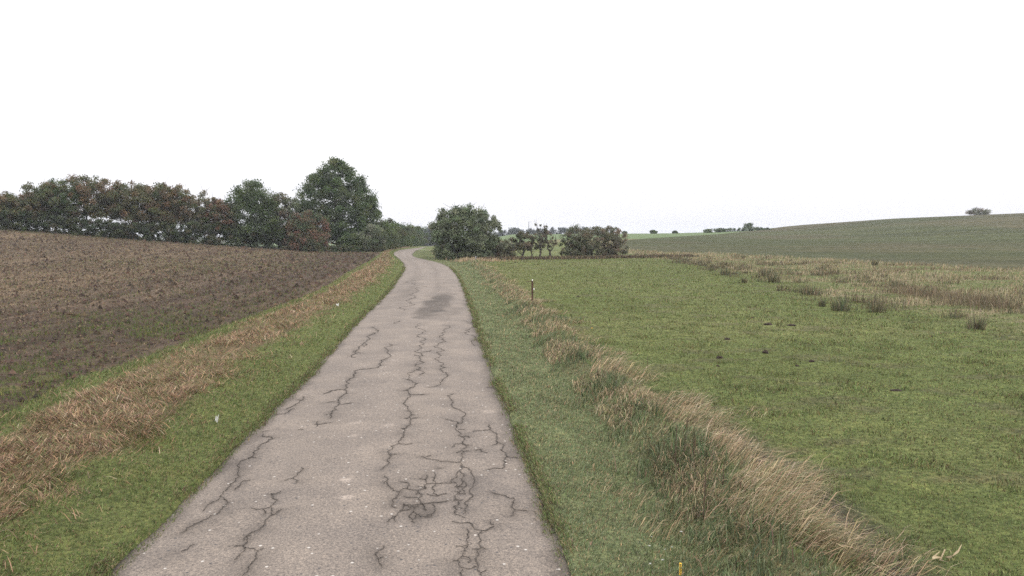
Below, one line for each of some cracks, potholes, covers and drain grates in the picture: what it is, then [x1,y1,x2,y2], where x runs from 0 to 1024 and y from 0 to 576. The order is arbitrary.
crack [181,281,517,576]
